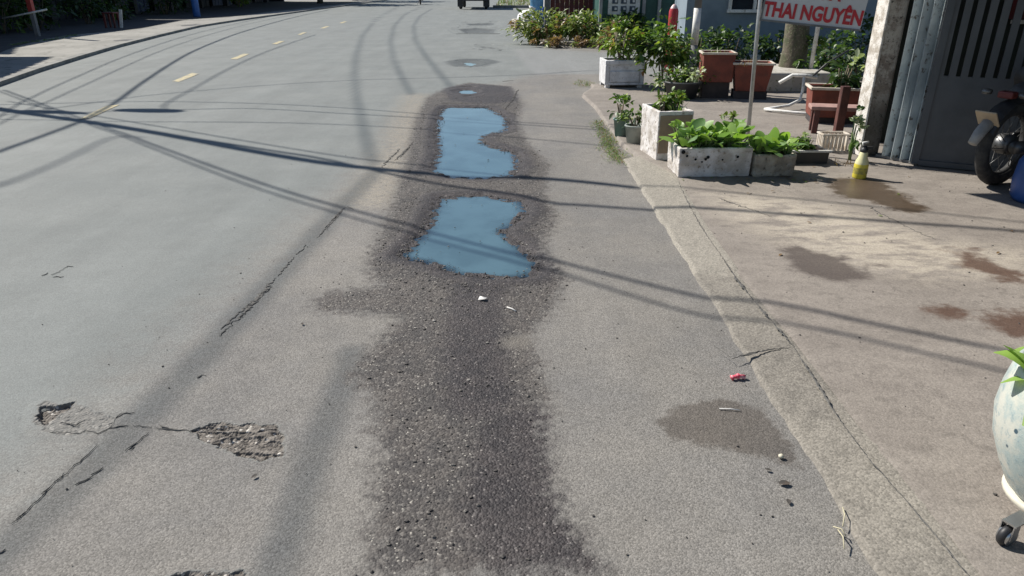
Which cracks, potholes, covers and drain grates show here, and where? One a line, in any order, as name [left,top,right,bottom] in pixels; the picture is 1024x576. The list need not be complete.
crack [0,412,190,553]
pothole [174,415,300,470]
pothole [18,396,131,443]
pothole [445,87,488,96]
pothole [377,188,566,288]
pothole [411,104,538,183]
crack [716,347,788,359]
